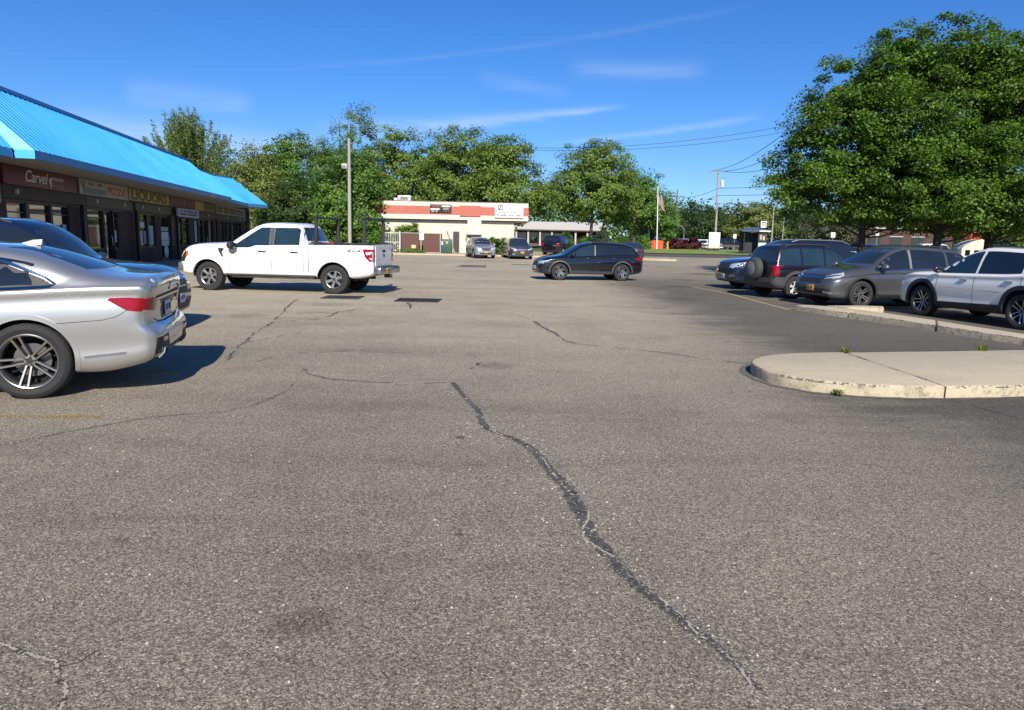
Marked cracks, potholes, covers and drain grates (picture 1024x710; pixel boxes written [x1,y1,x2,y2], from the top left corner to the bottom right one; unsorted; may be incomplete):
crack [0,357,763,691]
crack [226,299,365,361]
crack [0,595,238,710]
crack [491,309,746,364]
